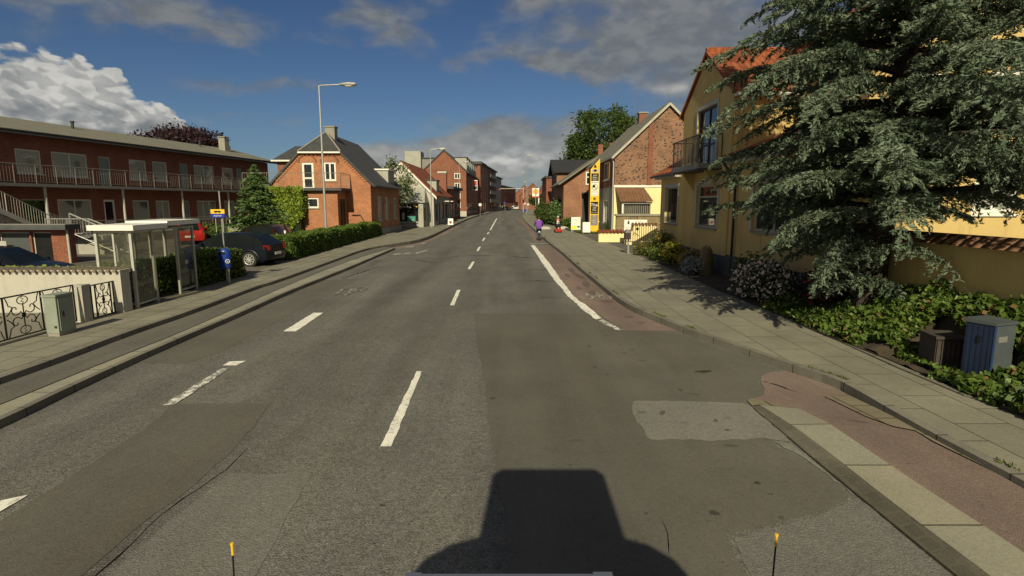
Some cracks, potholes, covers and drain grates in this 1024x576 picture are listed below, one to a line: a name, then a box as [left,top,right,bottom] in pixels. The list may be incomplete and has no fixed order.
crack [95,451,245,576]
